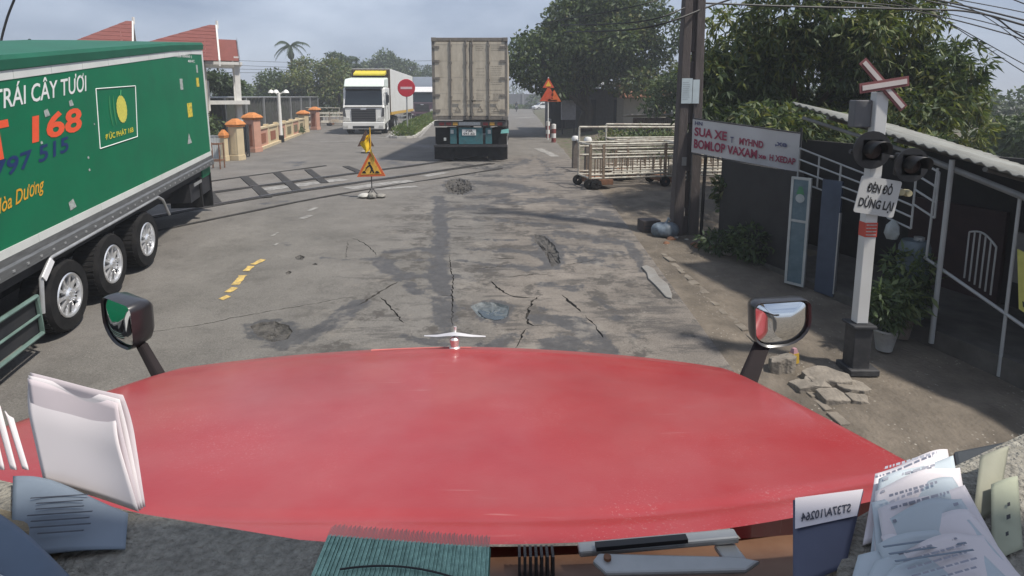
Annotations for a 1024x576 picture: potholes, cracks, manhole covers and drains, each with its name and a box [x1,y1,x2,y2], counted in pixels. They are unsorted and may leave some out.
pothole [251,321,293,342]
pothole [534,234,561,267]
crack [471,257,546,347]
crack [153,282,403,332]
crack [562,295,603,337]
pothole [445,179,472,195]
